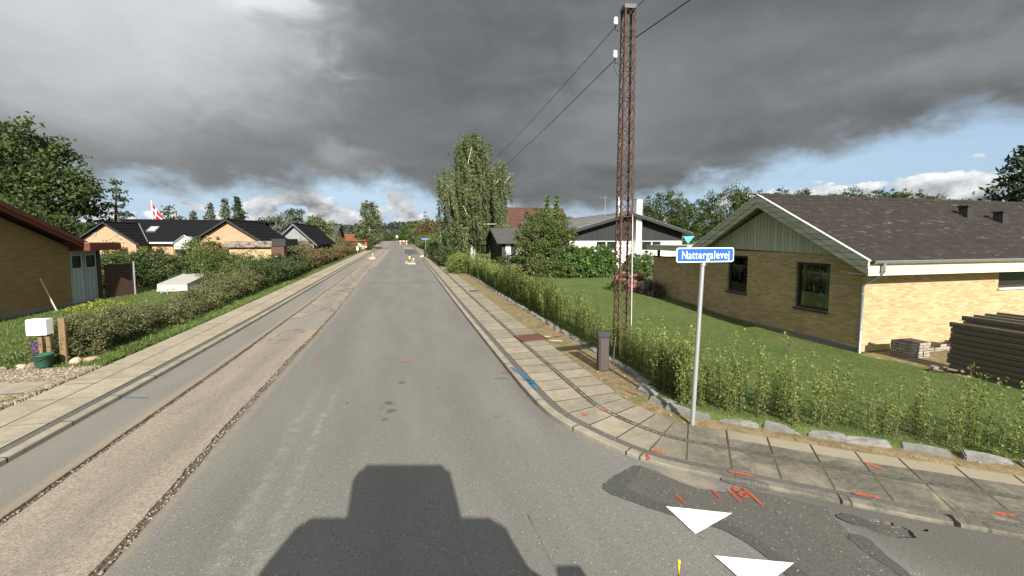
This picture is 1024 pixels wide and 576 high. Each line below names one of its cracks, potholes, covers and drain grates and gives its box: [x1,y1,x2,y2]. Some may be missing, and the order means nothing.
pothole [865,519,917,538]
manhole cover [514,333,549,343]
